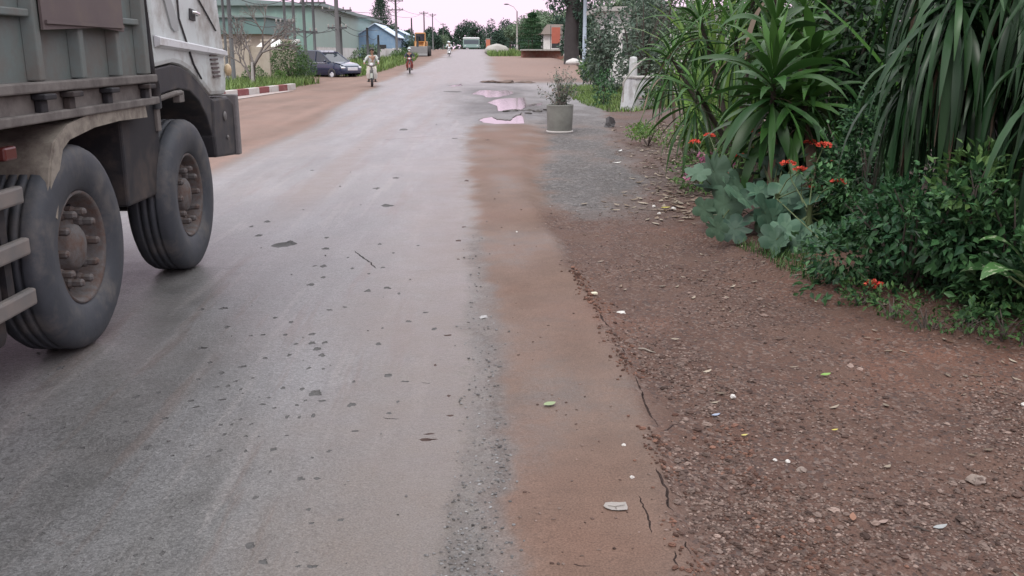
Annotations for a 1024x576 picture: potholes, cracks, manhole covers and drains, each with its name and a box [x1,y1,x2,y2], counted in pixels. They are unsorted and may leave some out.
crack [639,470,690,533]
pothole [271,240,297,248]
crack [635,377,679,431]
